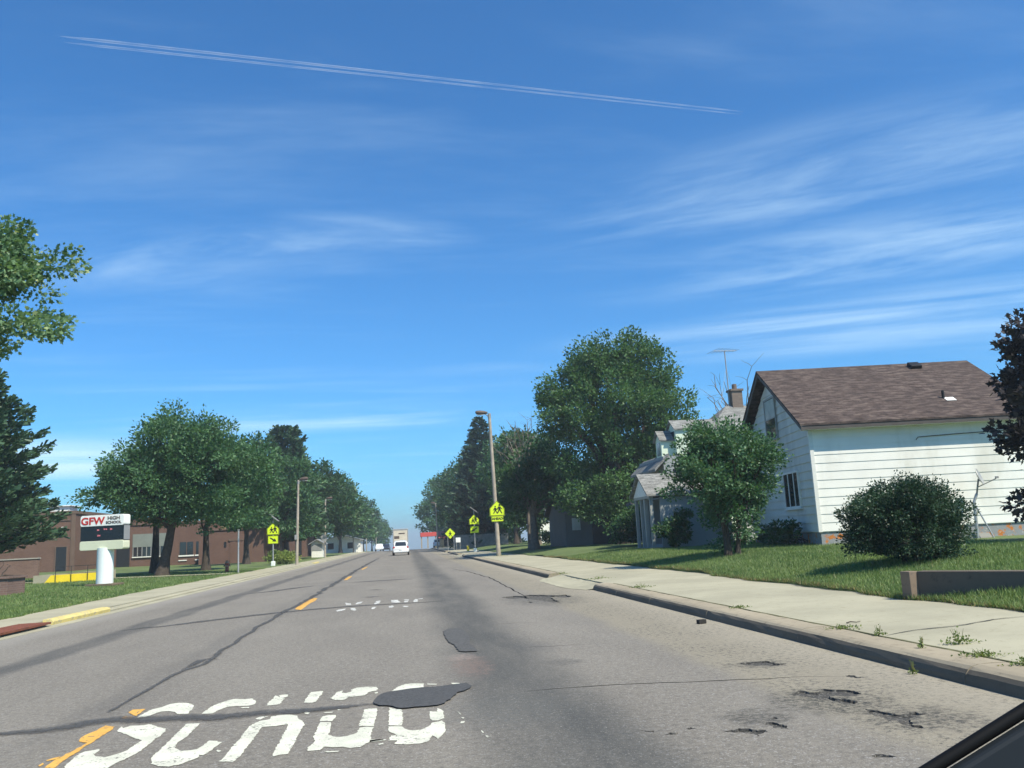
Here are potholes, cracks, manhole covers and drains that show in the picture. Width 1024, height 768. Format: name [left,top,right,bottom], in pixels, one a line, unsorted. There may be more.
crack [111,558,379,710]
crack [533,676,845,691]
pothole [502,595,571,603]
pothole [863,708,925,729]
pothole [724,728,768,736]
pothole [793,689,861,704]
